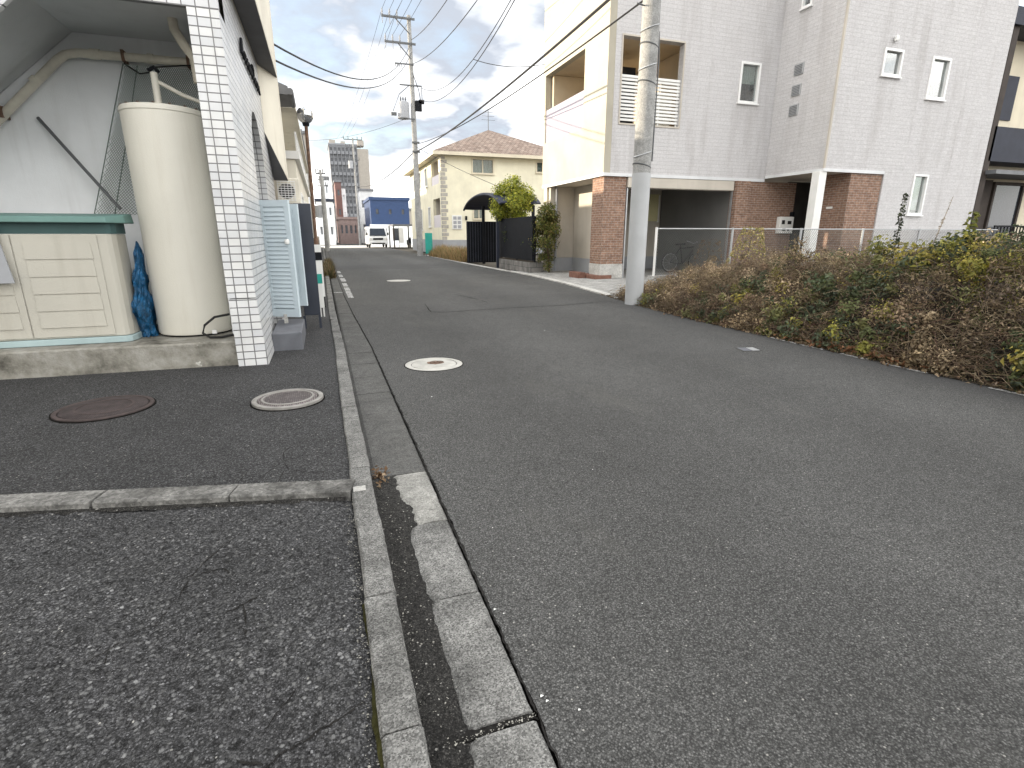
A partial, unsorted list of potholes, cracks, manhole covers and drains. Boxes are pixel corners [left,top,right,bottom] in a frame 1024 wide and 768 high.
manhole cover [404,357,463,372]
manhole cover [49,395,157,424]
crack [197,444,343,483]
manhole cover [250,388,325,412]
crack [82,533,240,666]
